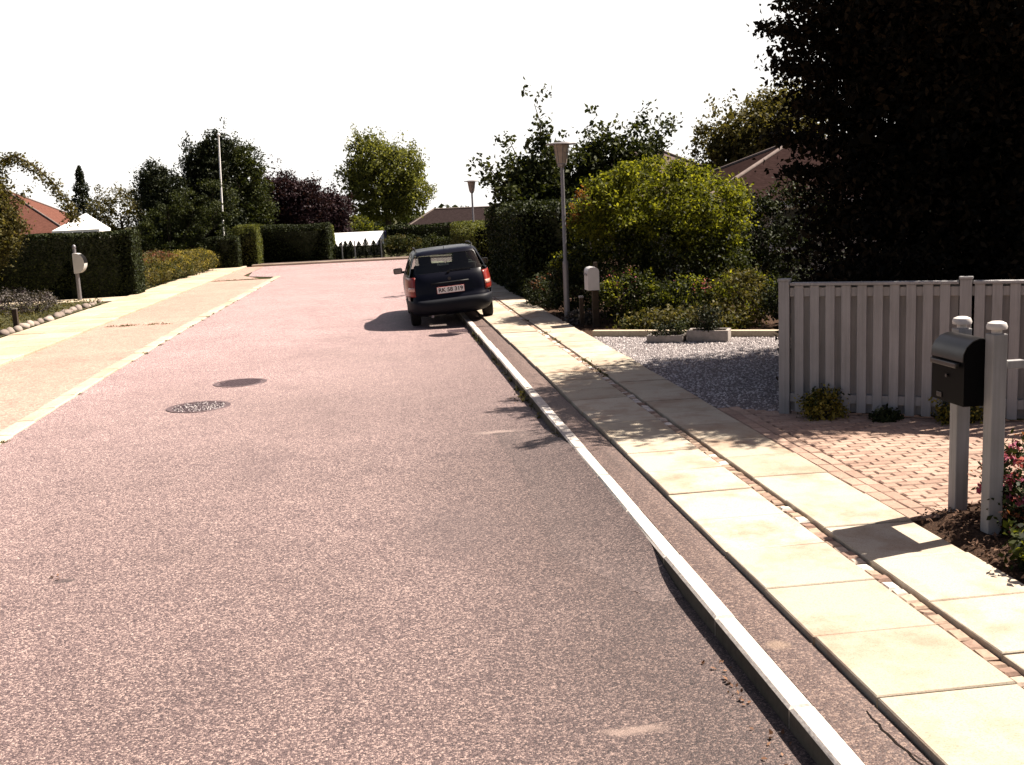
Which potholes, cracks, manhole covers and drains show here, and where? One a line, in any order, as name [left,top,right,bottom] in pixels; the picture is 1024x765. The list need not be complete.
crack [867,711,929,765]
manhole cover [166,401,231,413]
